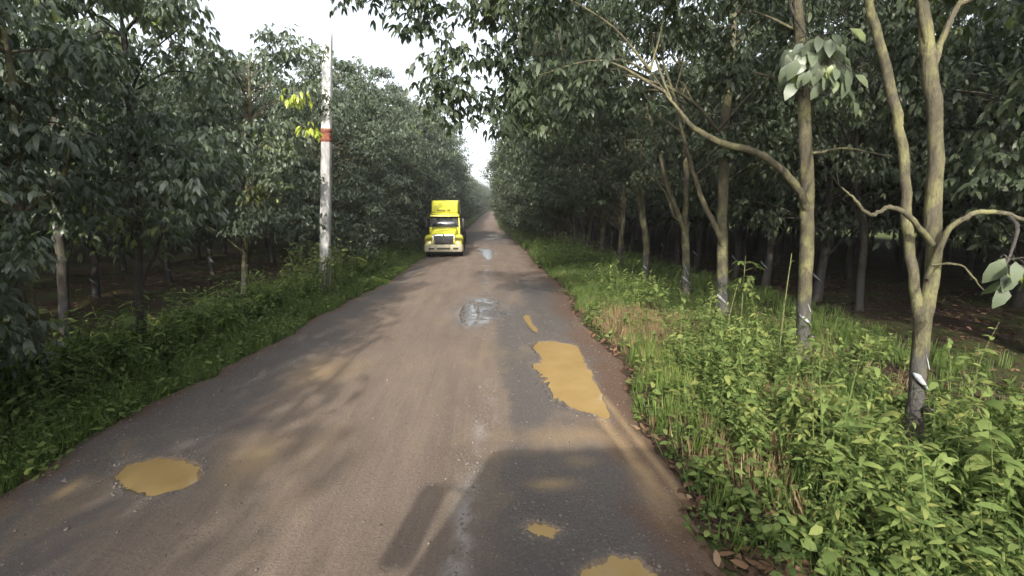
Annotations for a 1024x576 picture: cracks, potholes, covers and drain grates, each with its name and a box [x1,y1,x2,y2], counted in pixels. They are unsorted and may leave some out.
pothole [523,339,614,424]
pothole [559,542,677,576]
pothole [455,301,485,328]
pothole [521,314,540,334]
pothole [97,451,218,503]
pothole [477,249,496,260]
